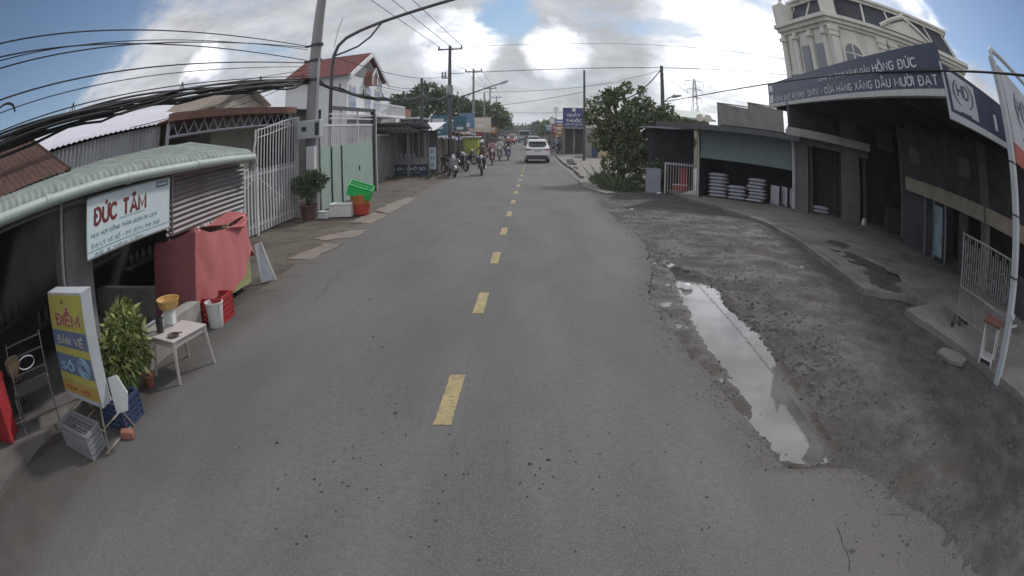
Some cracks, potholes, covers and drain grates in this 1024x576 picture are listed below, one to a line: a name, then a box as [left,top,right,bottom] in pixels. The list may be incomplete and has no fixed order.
pothole [646,250,846,470]
